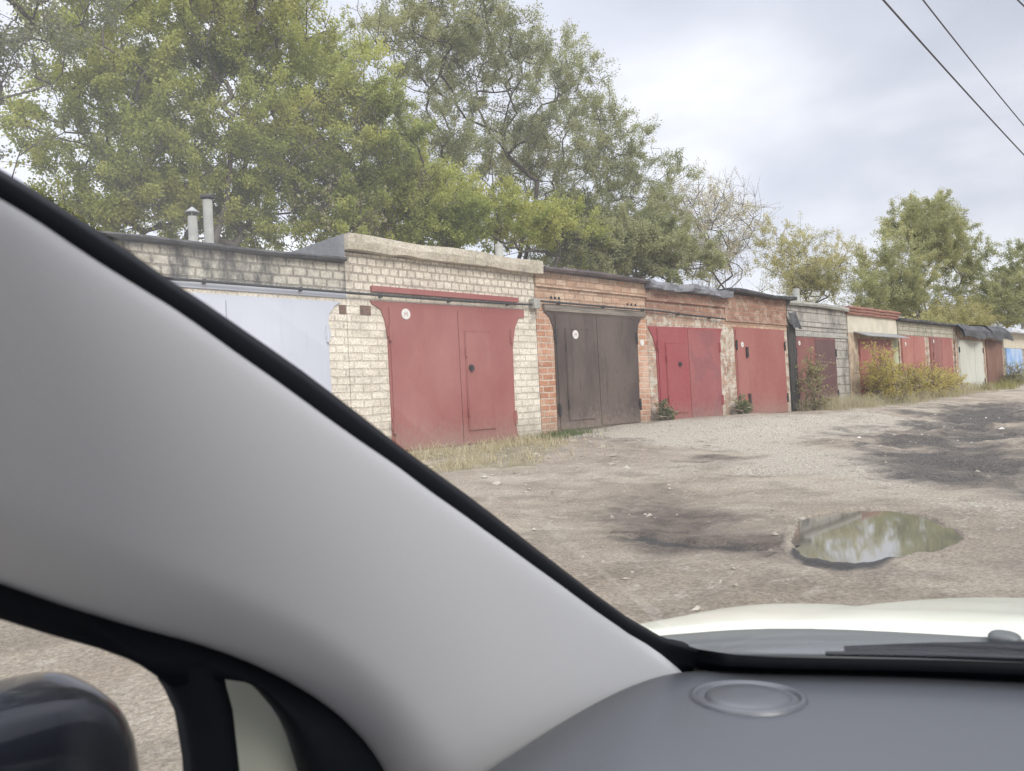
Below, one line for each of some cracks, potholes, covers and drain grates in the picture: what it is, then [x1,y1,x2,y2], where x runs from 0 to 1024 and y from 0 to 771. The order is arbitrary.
pothole [779,505,983,573]
